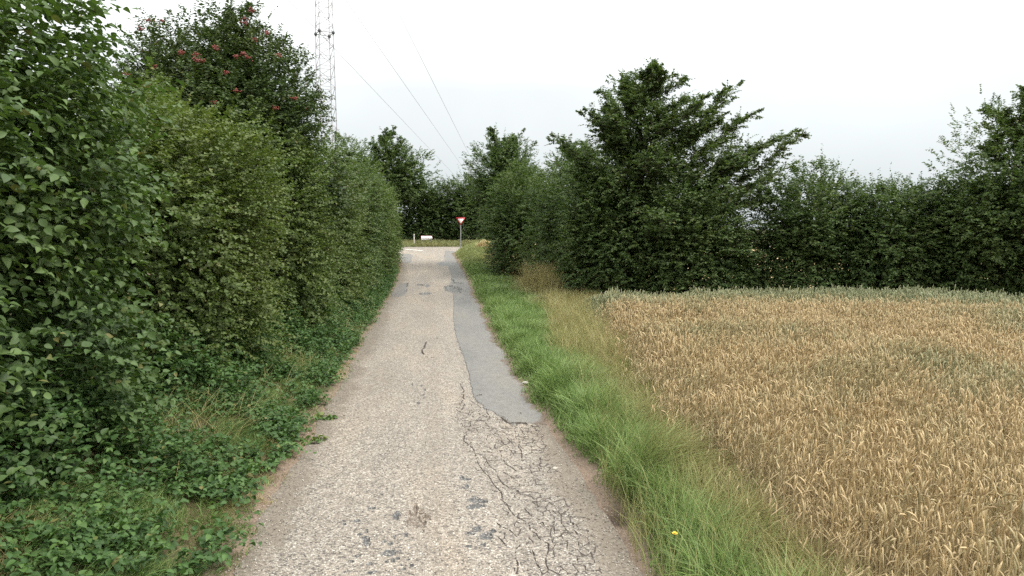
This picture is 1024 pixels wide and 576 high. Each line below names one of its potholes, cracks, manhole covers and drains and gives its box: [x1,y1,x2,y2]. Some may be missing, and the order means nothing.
pothole [405,503,432,532]
crack [455,382,604,575]
